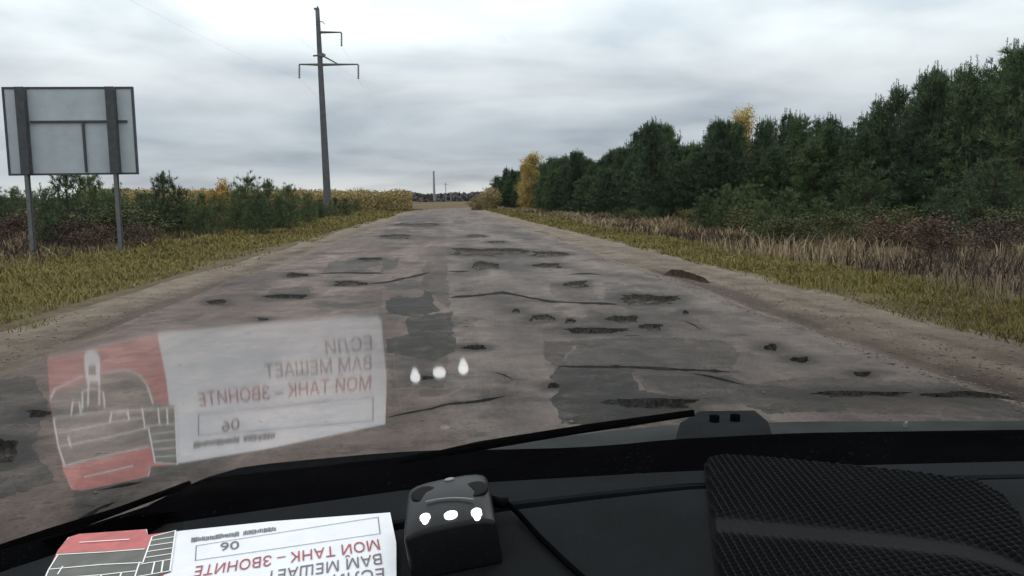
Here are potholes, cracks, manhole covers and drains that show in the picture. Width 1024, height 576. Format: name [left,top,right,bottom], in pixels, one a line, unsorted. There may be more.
pothole [529,314,556,322]
crack [390,373,514,417]
pothole [600,398,699,409]
pothole [450,248,530,257]
pothole [471,261,500,271]
pothole [662,269,710,283]
pothole [0,438,19,463]
pothole [618,294,681,306]
crack [450,273,617,305]
pothole [919,391,1020,400]
